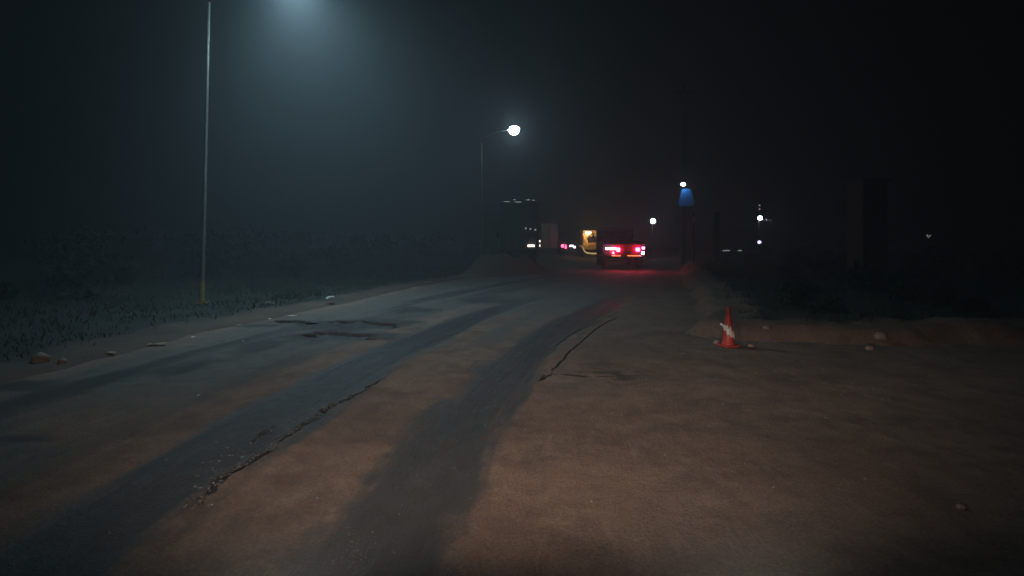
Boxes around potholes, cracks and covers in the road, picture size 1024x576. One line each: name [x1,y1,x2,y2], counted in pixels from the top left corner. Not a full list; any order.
pothole [284,331,391,342]
pothole [307,319,412,331]
pothole [265,319,327,327]
crack [528,317,623,385]
crack [183,378,395,507]
